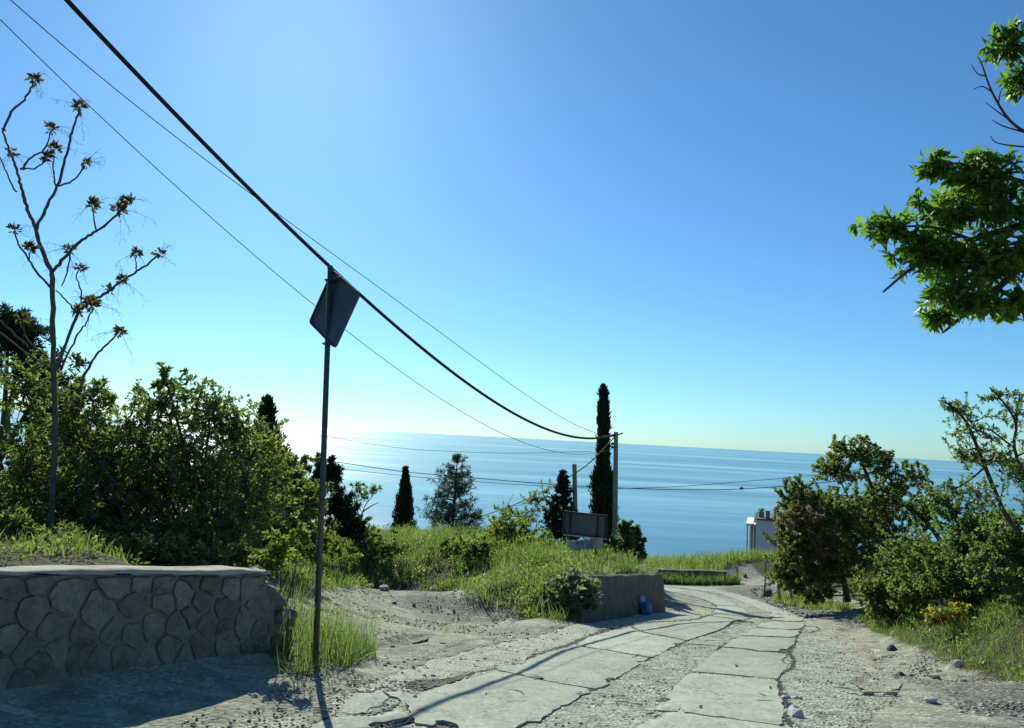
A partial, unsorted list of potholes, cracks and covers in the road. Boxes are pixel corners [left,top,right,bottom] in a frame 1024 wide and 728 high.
crack [367,686,408,714]
crack [507,590,729,720]
crack [760,620,820,727]
